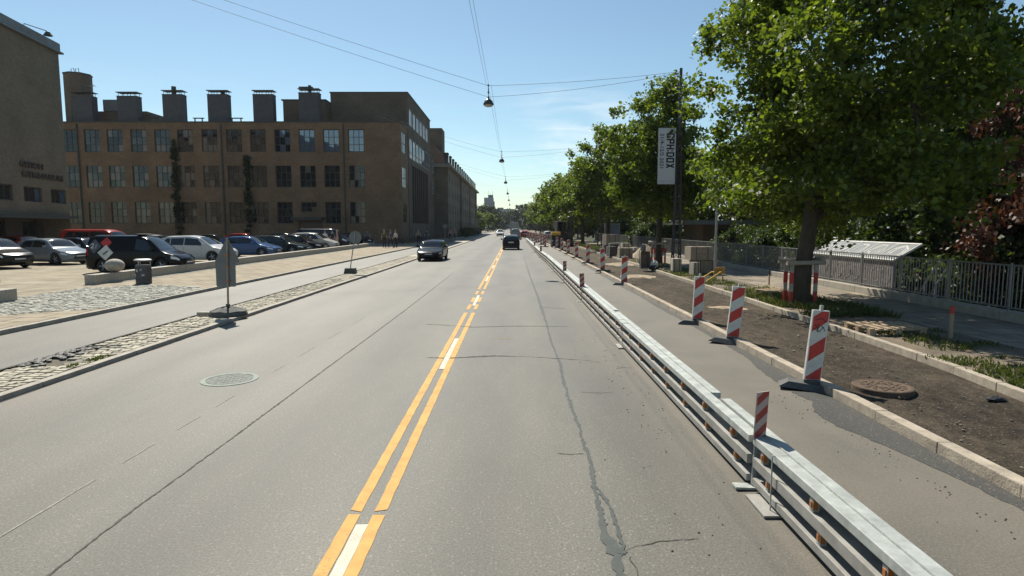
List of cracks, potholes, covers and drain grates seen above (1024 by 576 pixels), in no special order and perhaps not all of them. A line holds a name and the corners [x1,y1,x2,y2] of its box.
manhole cover [851,379,915,400]
manhole cover [200,373,259,386]
